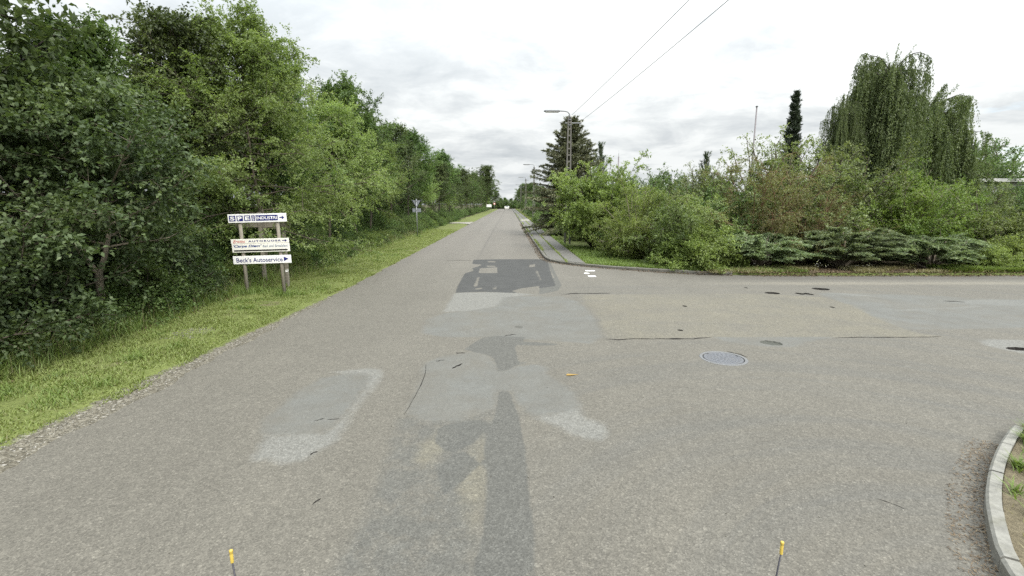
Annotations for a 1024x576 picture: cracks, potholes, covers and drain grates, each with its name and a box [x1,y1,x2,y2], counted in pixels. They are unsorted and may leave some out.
manhole cover [699,351,748,366]
